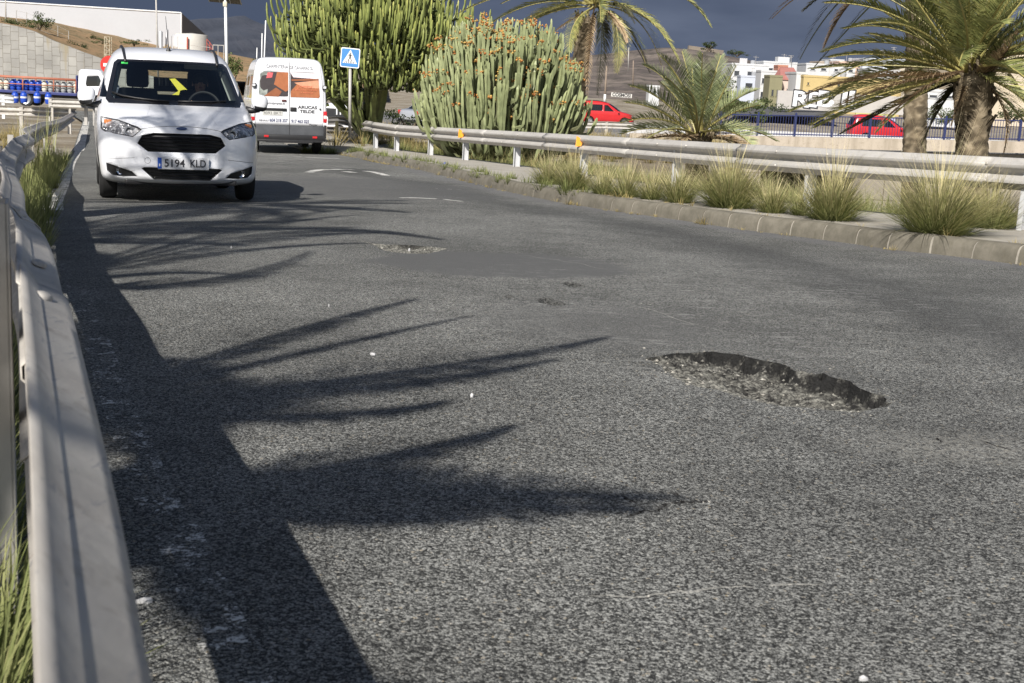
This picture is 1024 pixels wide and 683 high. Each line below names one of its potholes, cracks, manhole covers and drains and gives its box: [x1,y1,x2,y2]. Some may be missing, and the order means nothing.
pothole [363,241,448,254]
pothole [645,351,891,412]
crack [588,583,818,598]
pothole [537,298,566,306]
crack [936,438,1012,460]
